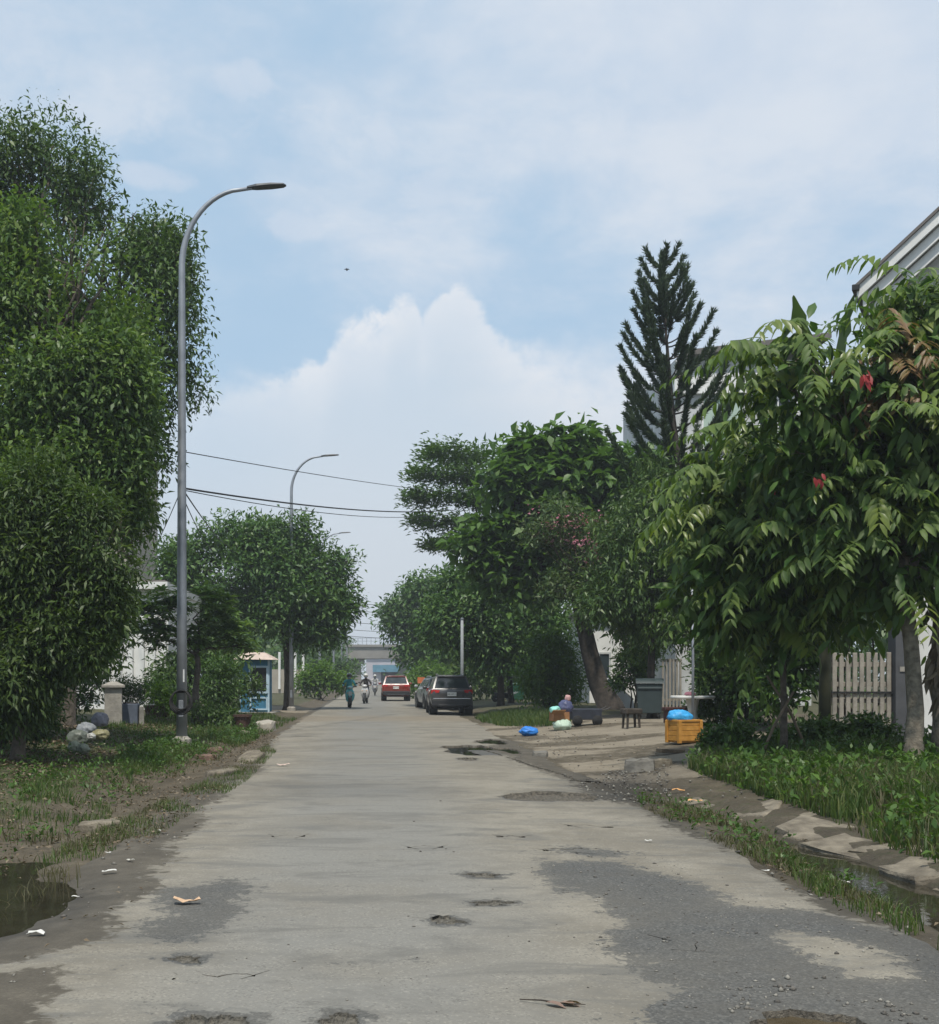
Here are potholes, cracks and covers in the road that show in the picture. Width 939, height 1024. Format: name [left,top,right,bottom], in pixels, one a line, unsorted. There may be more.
pothole [446,896,541,911]
pothole [720,1001,896,1024]
pothole [144,1007,278,1024]
pothole [289,1005,387,1024]
pothole [440,869,522,882]
crack [164,967,268,984]
pothole [430,744,534,758]
pothole [404,910,490,930]
pothole [143,950,225,969]
pothole [483,789,617,804]
